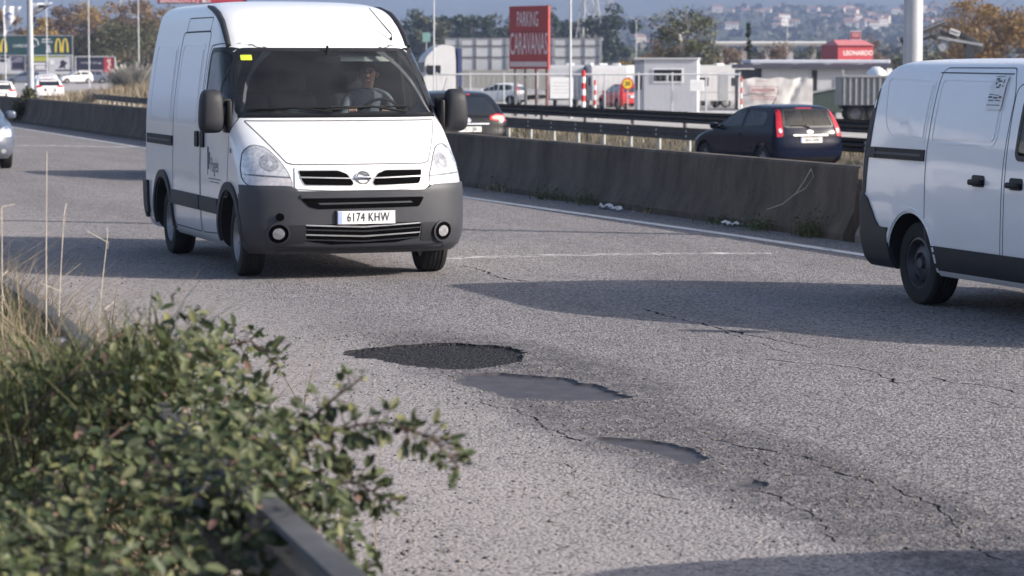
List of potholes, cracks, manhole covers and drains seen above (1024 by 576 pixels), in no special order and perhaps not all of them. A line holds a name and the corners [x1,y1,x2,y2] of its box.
crack [709,438,1006,561]
crack [929,376,1024,409]
pothole [734,479,769,488]
pothole [452,372,633,401]
pothole [342,343,528,369]
crack [644,309,905,384]
crack [480,401,591,444]
pothole [593,437,711,464]
